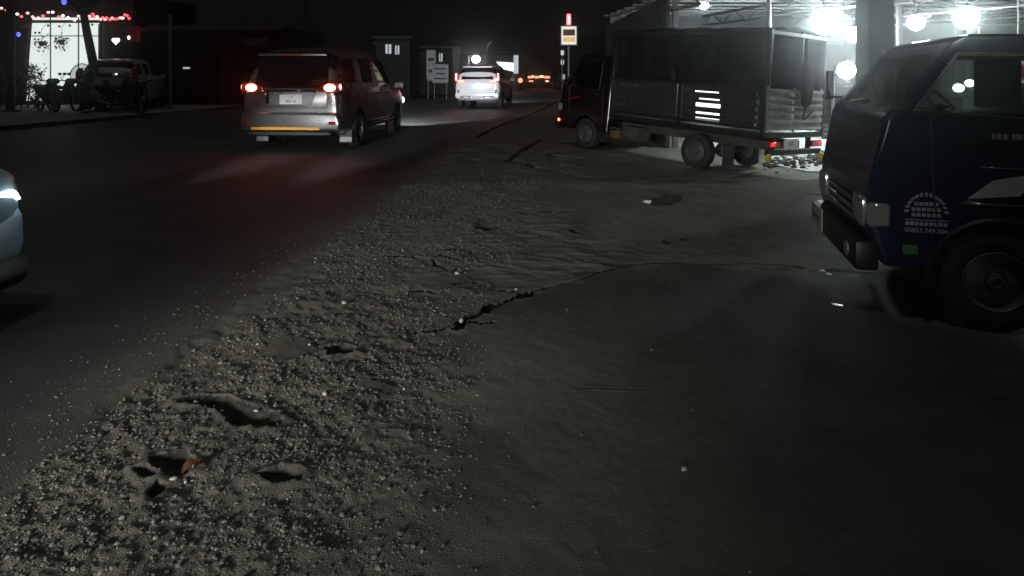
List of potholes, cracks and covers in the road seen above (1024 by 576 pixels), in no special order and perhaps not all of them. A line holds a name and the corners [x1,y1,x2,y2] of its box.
pothole [175,393,284,426]
crack [410,248,632,334]
pothole [650,193,683,206]
pothole [325,342,358,354]
pothole [147,479,167,498]
crack [475,103,553,138]
pothole [258,464,306,483]
pothole [149,448,195,476]
pothole [131,463,158,478]
